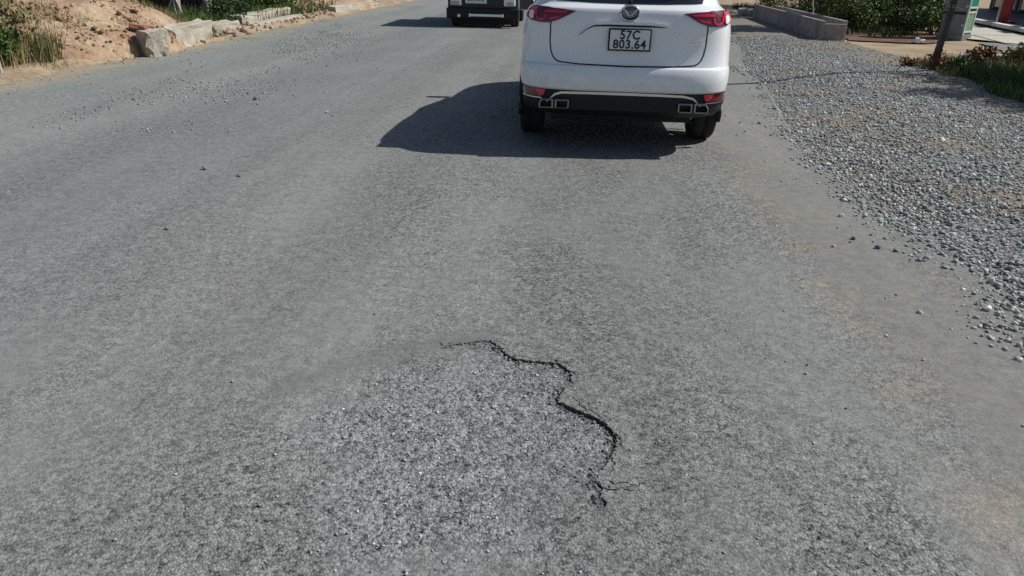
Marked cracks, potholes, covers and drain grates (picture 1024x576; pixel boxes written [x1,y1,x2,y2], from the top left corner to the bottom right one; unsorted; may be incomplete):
crack [440,337,645,515]
